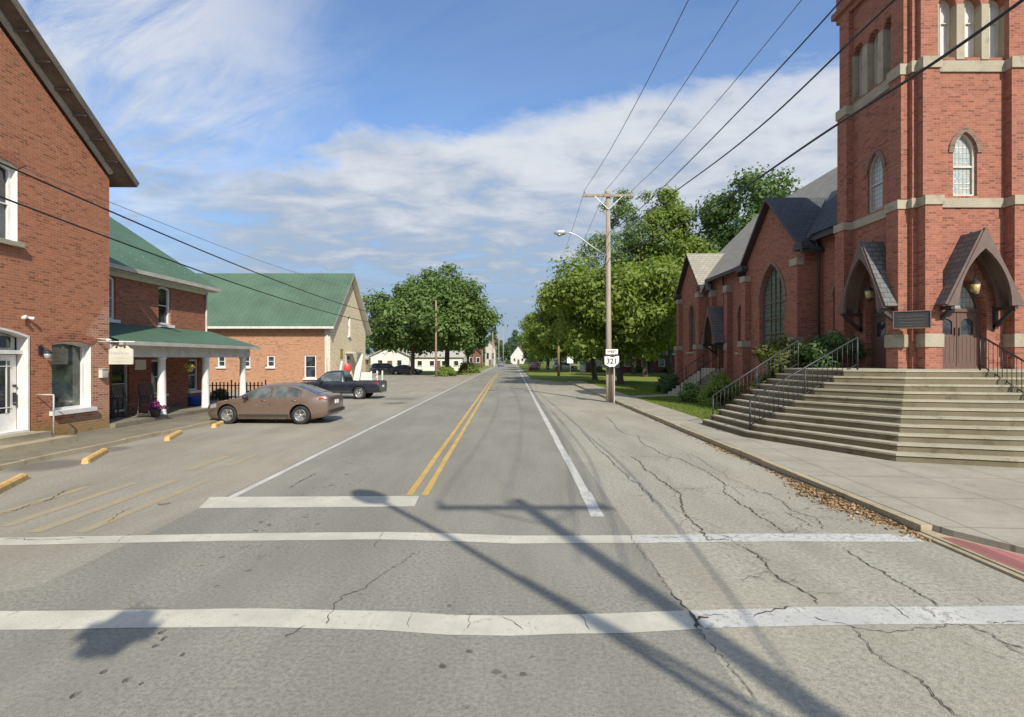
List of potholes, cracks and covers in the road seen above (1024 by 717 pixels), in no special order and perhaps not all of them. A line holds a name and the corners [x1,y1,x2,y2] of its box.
crack [326,556,411,624]
crack [579,418,1024,717]
